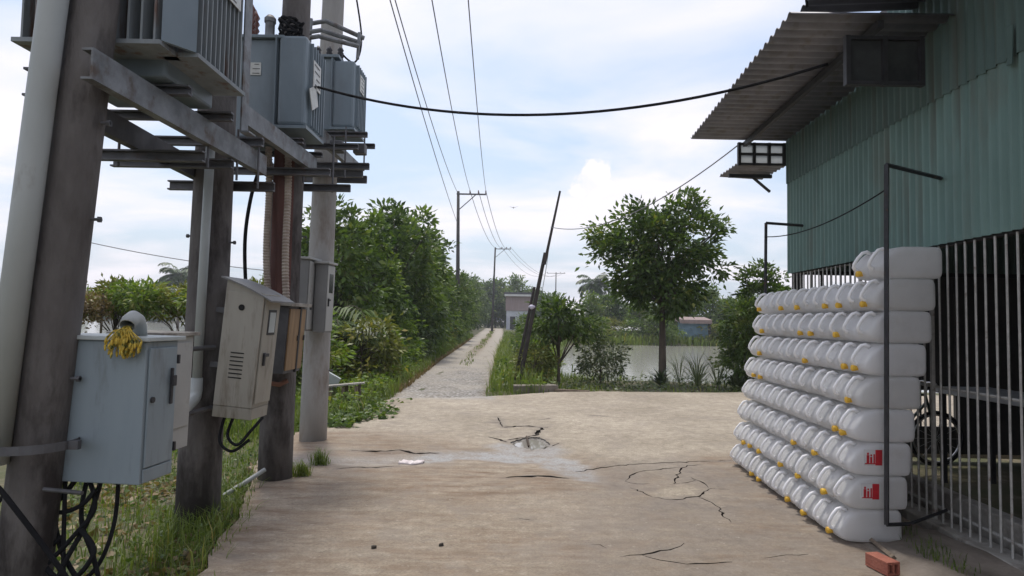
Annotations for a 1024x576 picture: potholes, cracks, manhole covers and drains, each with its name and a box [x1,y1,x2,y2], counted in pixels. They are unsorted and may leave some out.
crack [339,450,436,469]
crack [506,461,731,522]
crack [490,418,559,446]
pothole [510,437,550,449]
crack [622,543,727,564]
